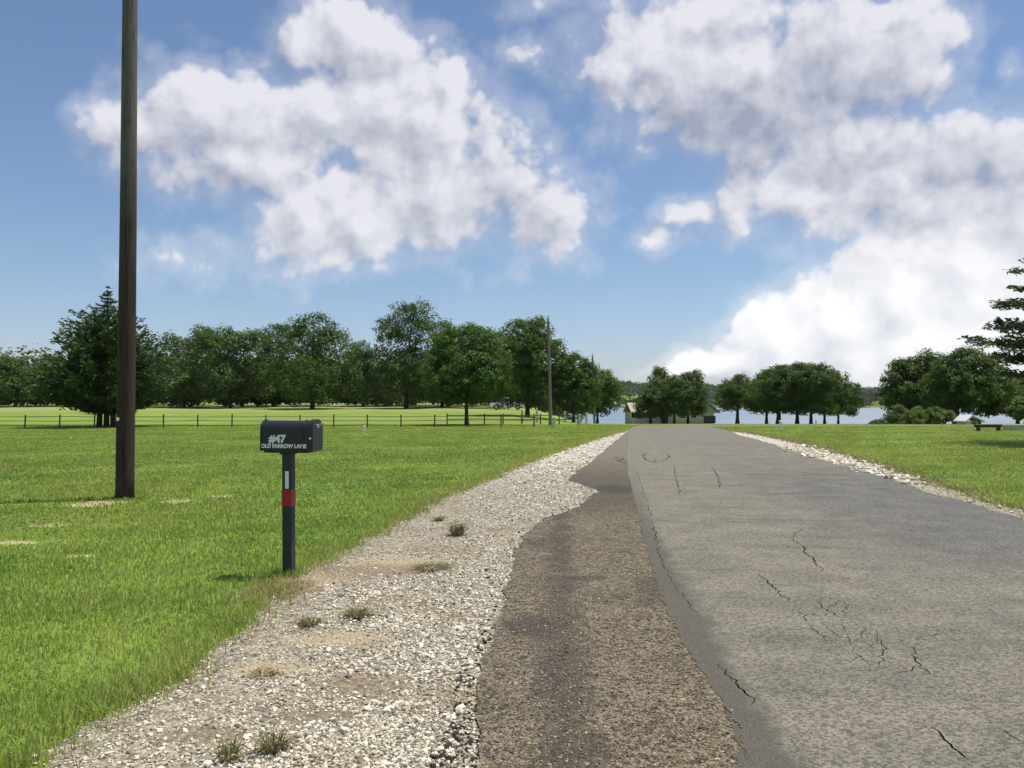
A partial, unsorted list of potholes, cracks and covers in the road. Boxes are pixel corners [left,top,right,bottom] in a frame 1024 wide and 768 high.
crack [759,575,941,675]
crack [920,727,969,760]
crack [718,666,755,759]
